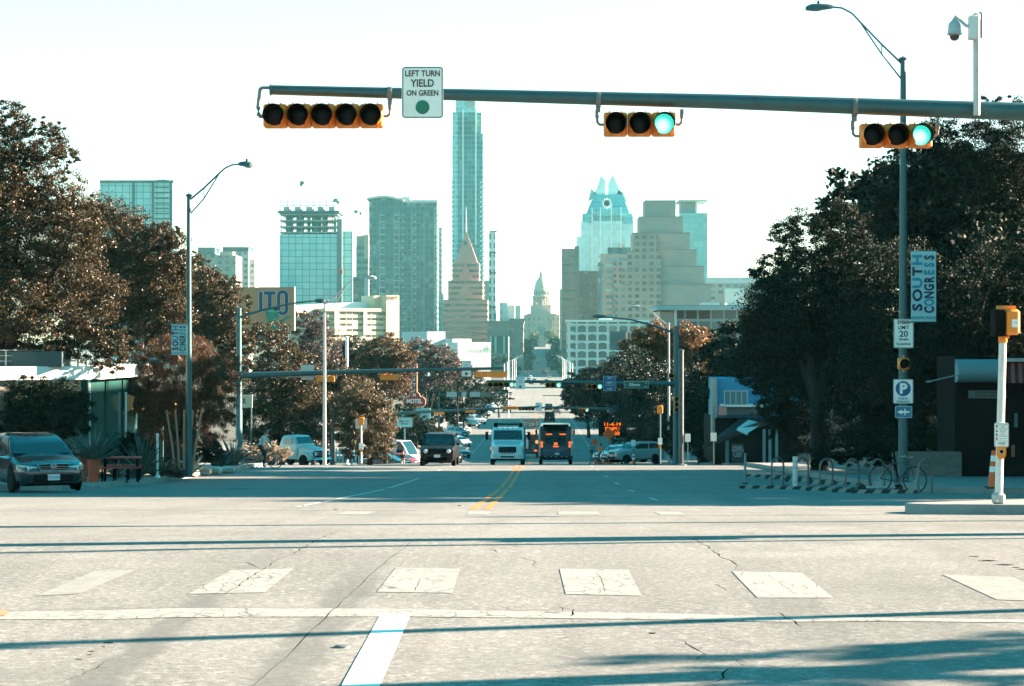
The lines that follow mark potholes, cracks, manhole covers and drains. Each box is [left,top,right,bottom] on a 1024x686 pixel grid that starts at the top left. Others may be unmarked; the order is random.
crack [681,640,744,685]
crack [218,531,336,594]
